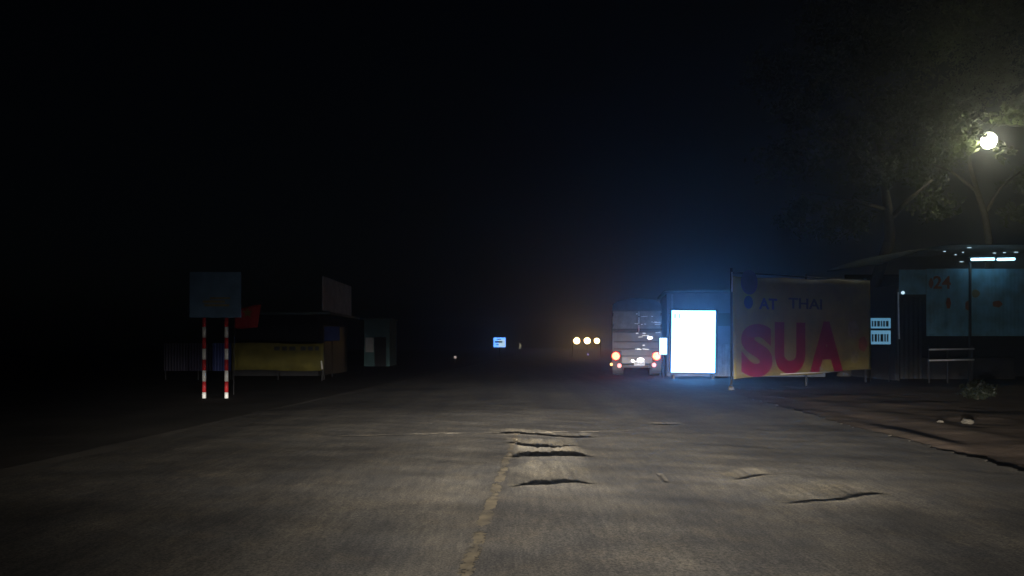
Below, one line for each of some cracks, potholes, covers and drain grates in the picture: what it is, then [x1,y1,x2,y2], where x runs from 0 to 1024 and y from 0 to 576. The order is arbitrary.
pothole [501,436,579,448]
pothole [486,428,600,438]
pothole [507,445,595,458]
